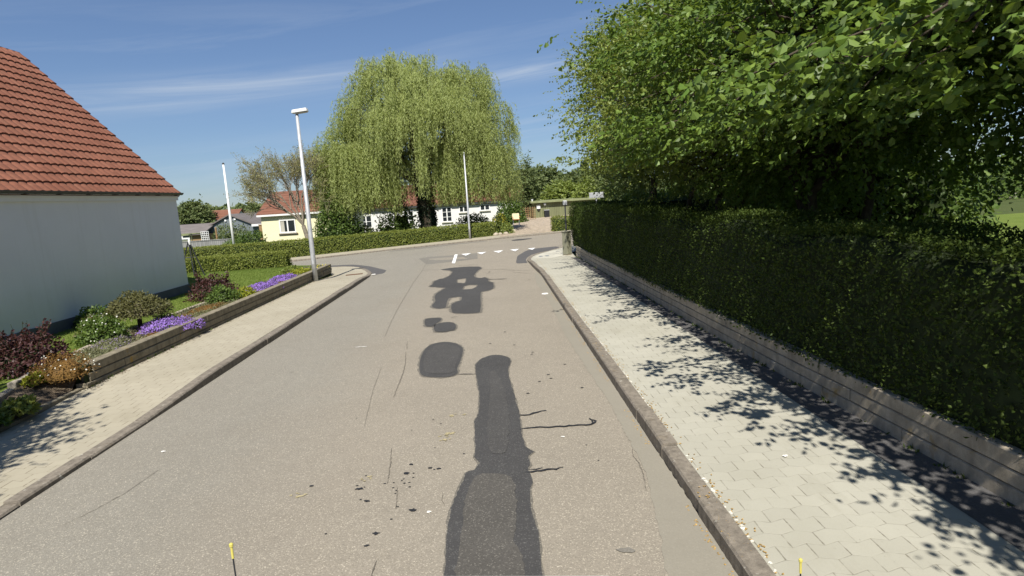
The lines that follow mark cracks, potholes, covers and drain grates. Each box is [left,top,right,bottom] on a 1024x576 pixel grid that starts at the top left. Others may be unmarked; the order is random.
crack [364,341,408,426]
